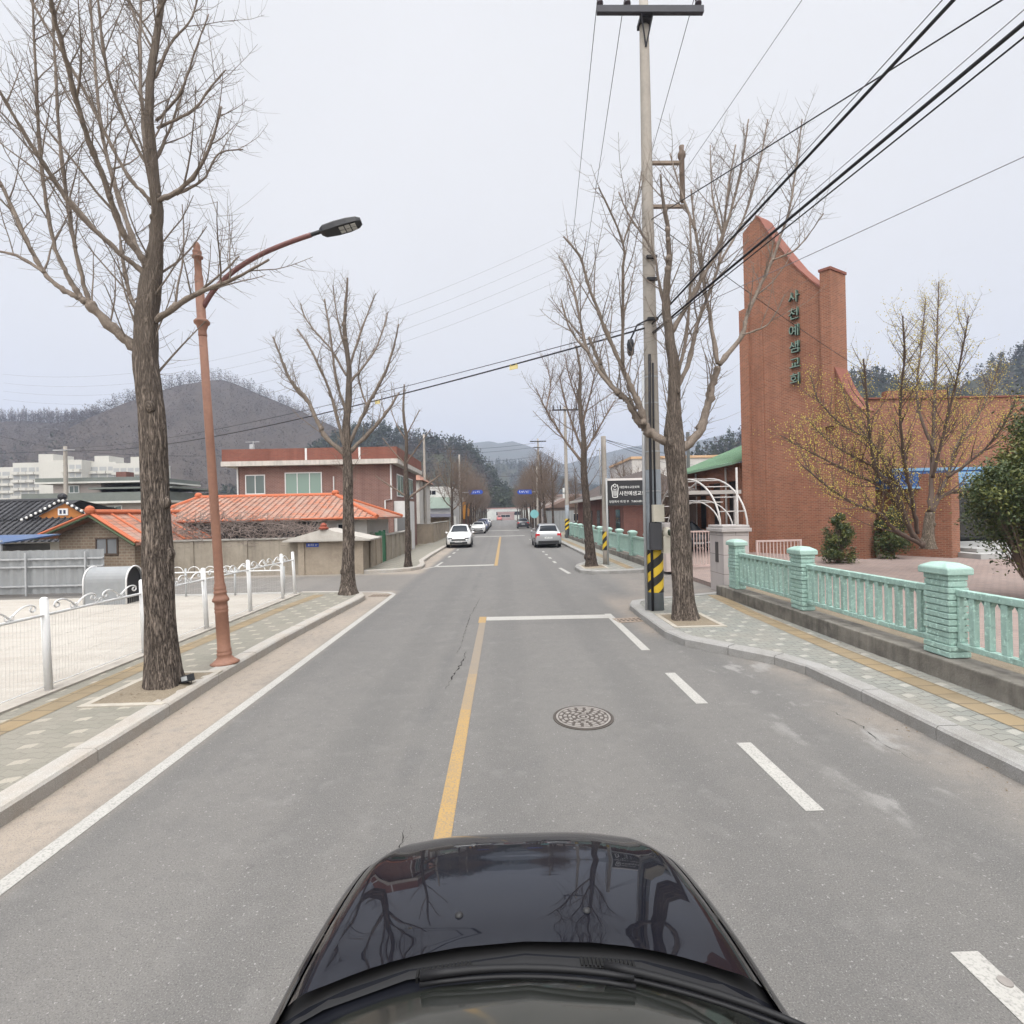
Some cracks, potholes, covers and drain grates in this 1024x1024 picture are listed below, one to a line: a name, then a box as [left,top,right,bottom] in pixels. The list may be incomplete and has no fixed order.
manhole cover [553,706,614,730]
